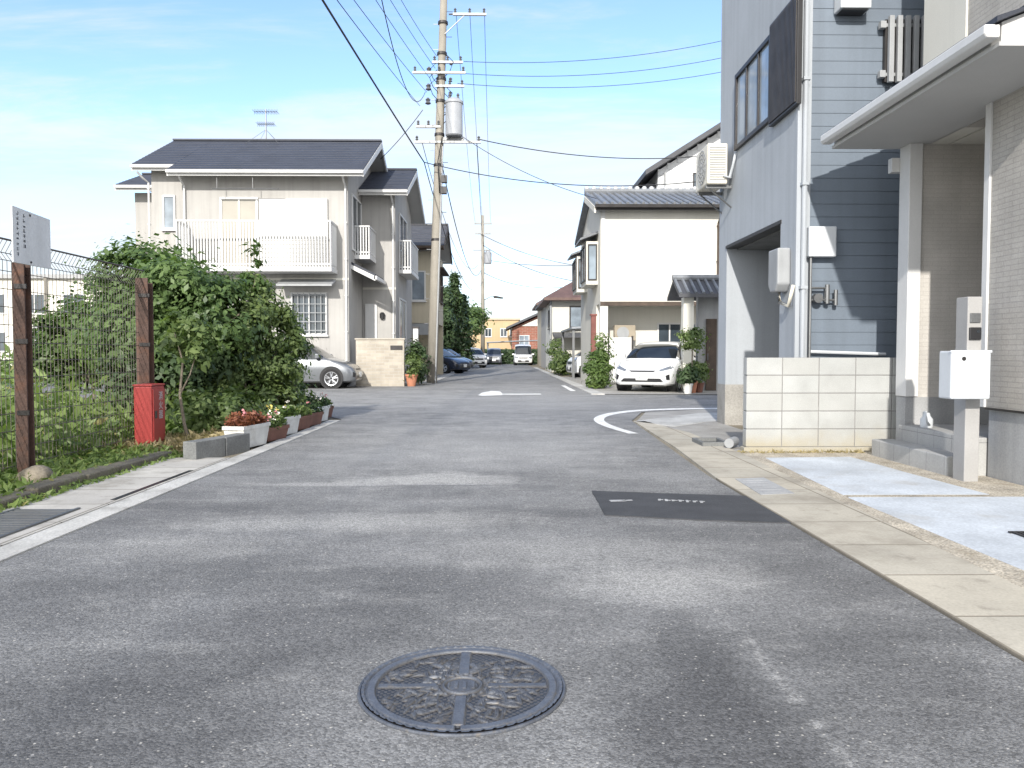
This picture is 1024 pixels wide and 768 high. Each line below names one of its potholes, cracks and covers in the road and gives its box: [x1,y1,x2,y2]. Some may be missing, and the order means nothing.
manhole cover [357,645,566,738]
drain grate [0,507,81,538]
